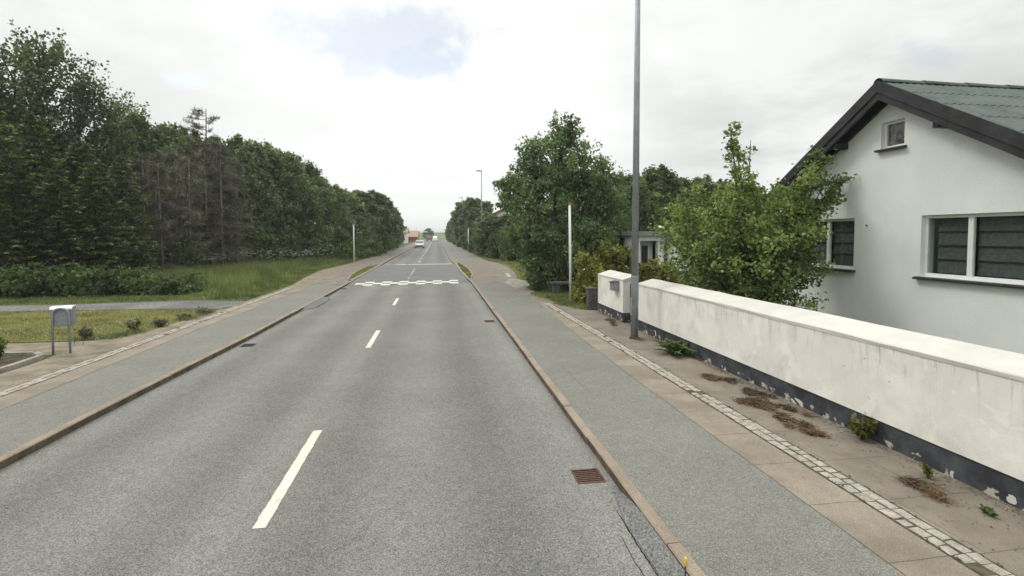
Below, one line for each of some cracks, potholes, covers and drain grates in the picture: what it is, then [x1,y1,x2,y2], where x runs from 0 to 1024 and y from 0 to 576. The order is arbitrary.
crack [614,507,658,576]
drain grate [570,468,607,484]
